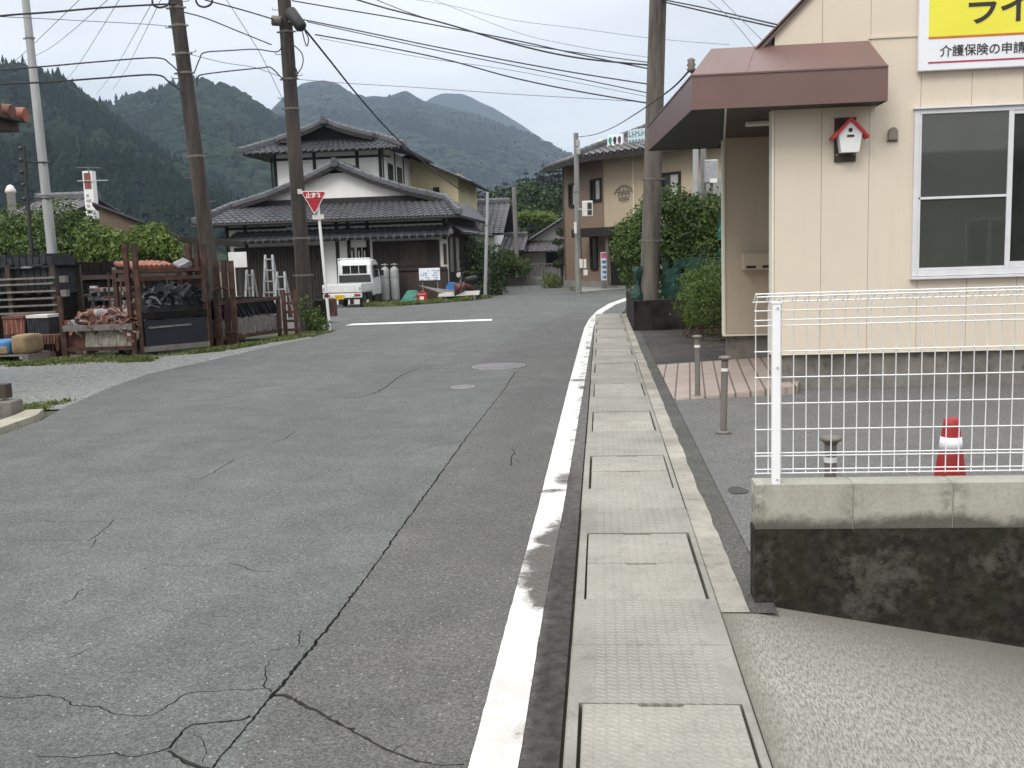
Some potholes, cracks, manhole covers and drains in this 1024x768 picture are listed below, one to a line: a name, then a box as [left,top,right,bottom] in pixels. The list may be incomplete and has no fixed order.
crack [0,630,464,768]
crack [28,520,113,555]
